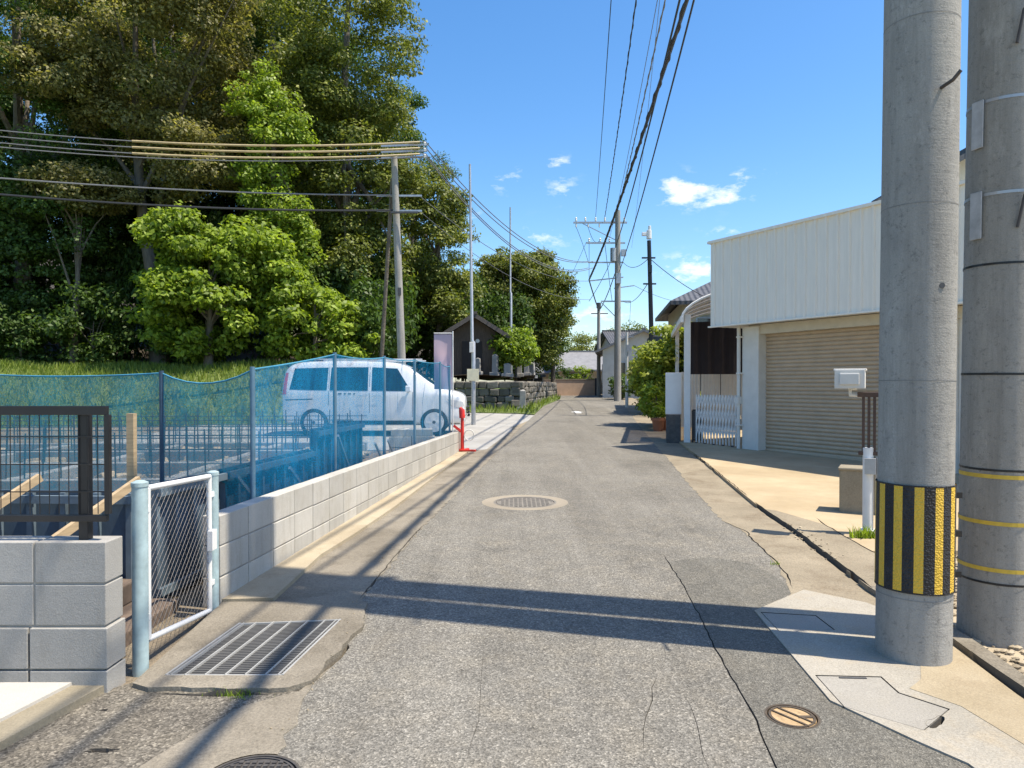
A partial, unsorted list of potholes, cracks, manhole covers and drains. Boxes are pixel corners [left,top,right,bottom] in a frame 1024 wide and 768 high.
utility cover [761,612,835,631]
drain grate [165,619,341,675]
manhole cover [482,495,568,510]
crack [643,503,871,768]
manhole cover [764,704,822,730]
crack [359,525,424,599]
utility cover [815,675,950,730]
manhole cover [216,754,301,768]
